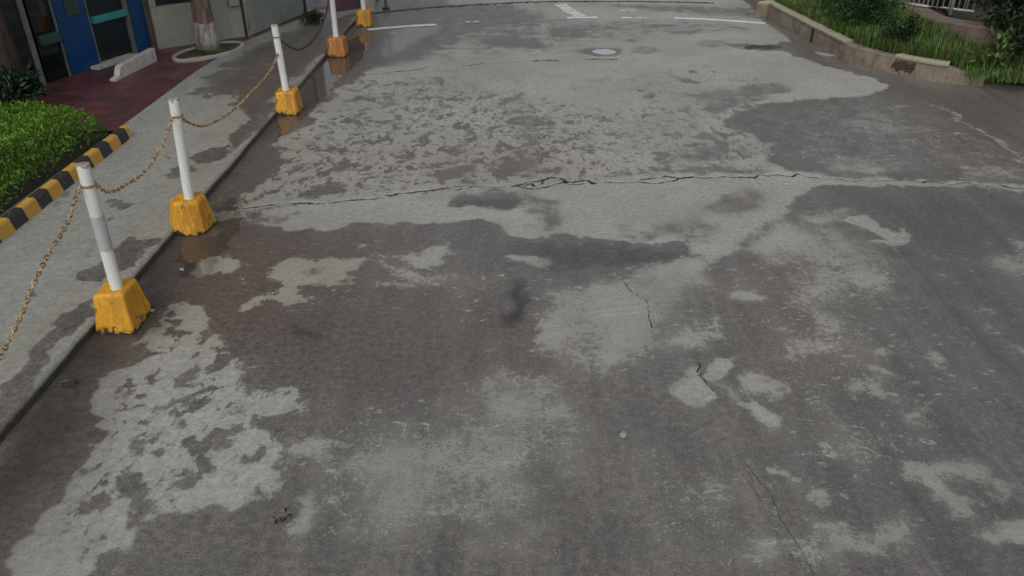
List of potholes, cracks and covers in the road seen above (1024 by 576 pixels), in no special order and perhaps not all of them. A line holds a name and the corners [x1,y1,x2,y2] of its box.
crack [733,454,827,576]
crack [348,56,821,77]
crack [686,356,725,398]
crack [226,100,1024,217]
crack [582,278,688,333]
